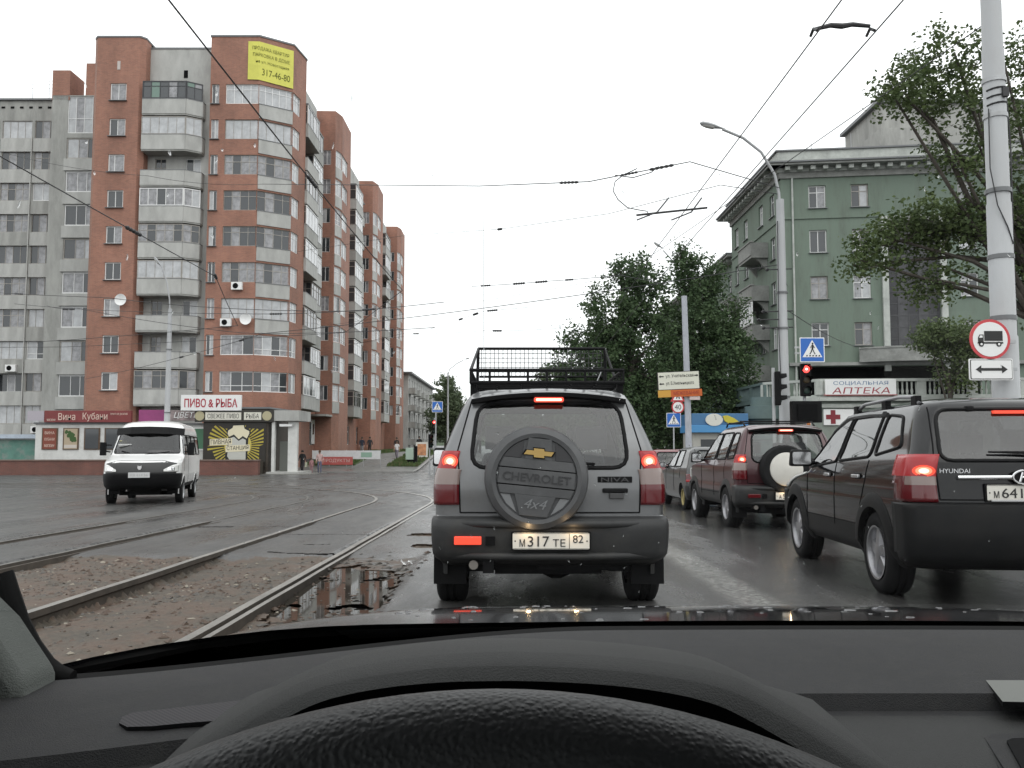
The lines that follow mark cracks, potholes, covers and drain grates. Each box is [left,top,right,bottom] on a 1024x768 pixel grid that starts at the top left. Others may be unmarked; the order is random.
pothole [257,564,405,627]
crack [267,534,361,555]
